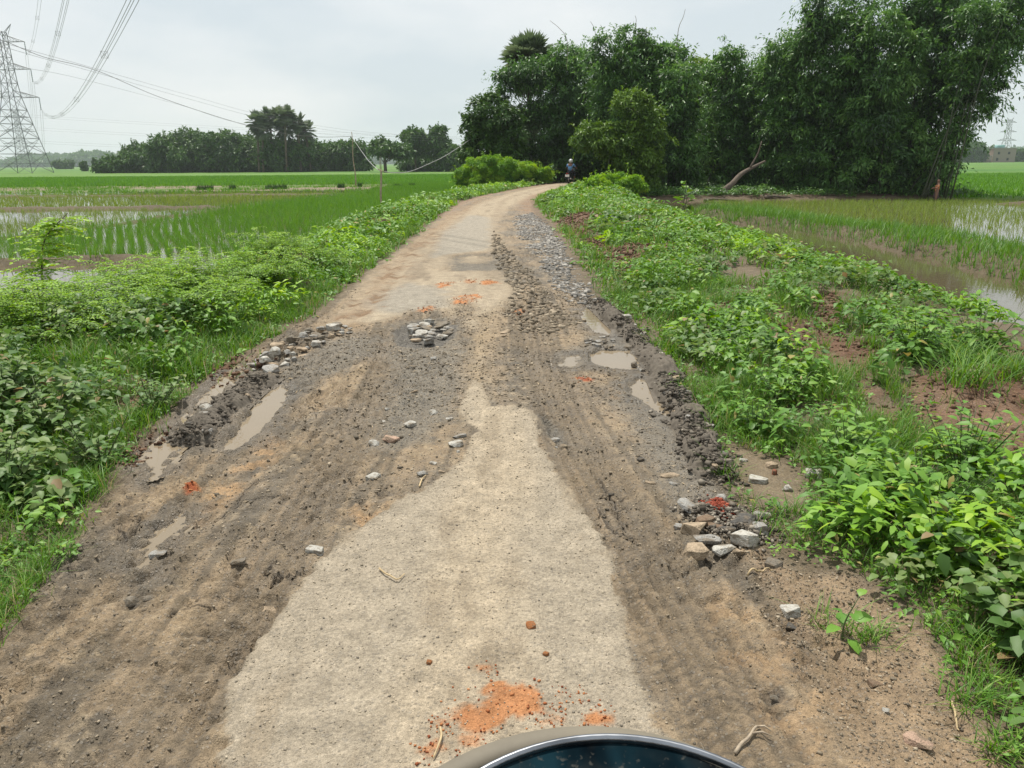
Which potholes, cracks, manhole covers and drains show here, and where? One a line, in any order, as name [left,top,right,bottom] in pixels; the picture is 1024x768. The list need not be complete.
pothole [550,351,591,370]
pothole [579,347,647,371]
pothole [212,383,294,453]
pothole [576,306,618,337]
pothole [122,510,197,585]
pothole [620,375,670,420]
